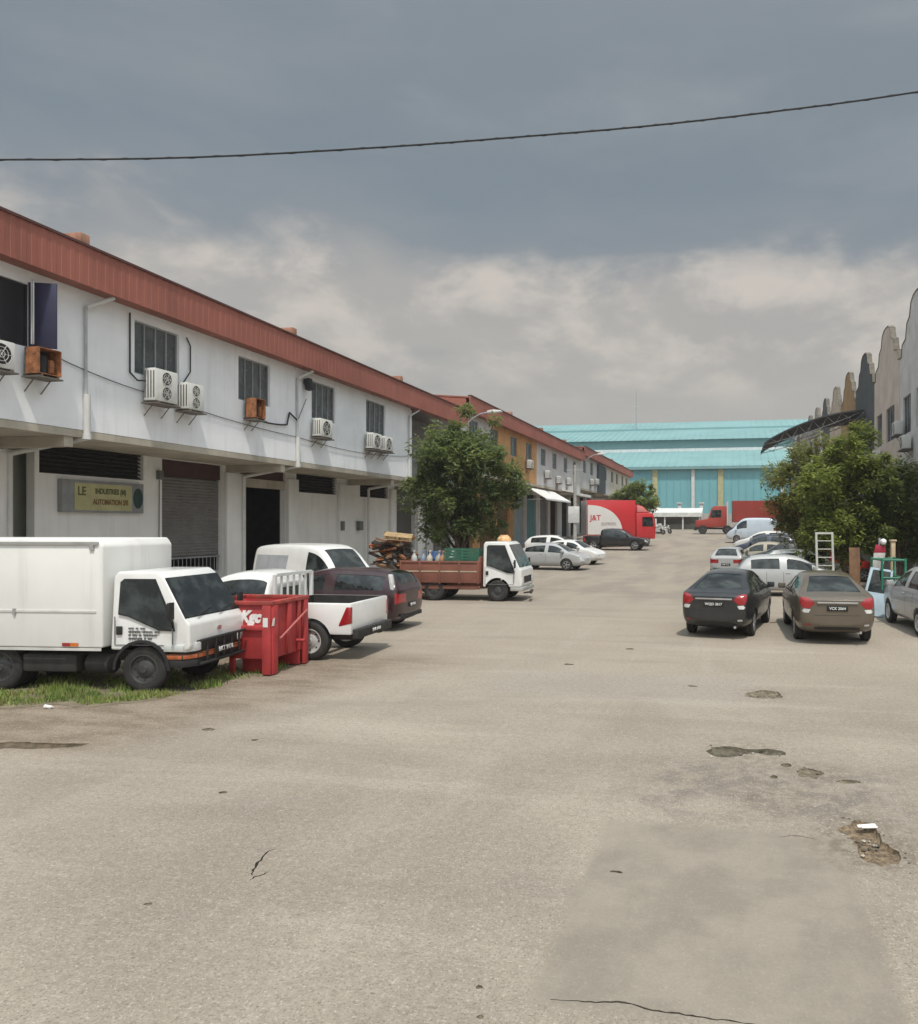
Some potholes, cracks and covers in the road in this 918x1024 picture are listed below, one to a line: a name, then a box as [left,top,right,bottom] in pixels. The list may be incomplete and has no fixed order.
pothole [794,767,824,779]
pothole [827,817,911,874]
crack [550,999,752,1024]
crack [250,849,274,880]
pothole [706,745,786,757]
pothole [745,690,783,699]
